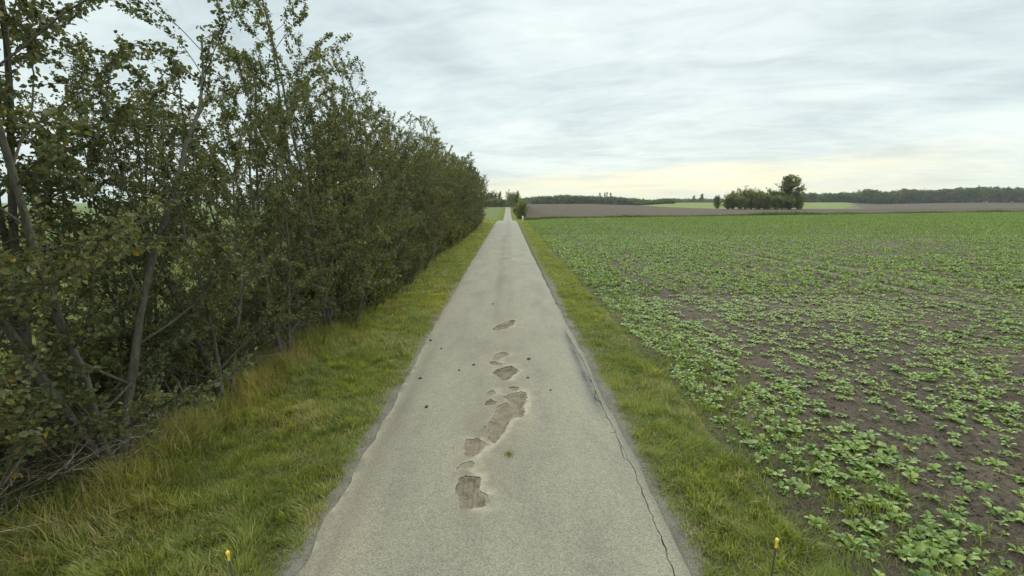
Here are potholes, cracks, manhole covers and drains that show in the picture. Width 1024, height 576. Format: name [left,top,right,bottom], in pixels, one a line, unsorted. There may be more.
pothole [464,438,486,457]
pothole [492,320,516,331]
pothole [492,366,518,380]
crack [565,332,675,576]
pothole [488,391,528,443]
pothole [455,475,490,510]
